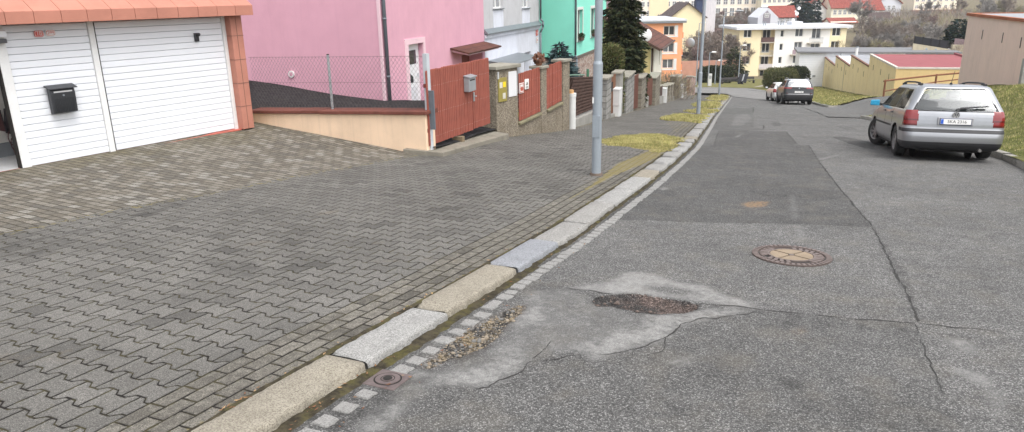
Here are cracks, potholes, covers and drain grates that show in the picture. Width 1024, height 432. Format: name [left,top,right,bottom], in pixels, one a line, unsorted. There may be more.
manhole cover [752,244,833,267]
pothole [592,294,699,315]
pothole [421,304,524,368]
crack [476,303,1021,394]
utility cover [362,369,413,391]
